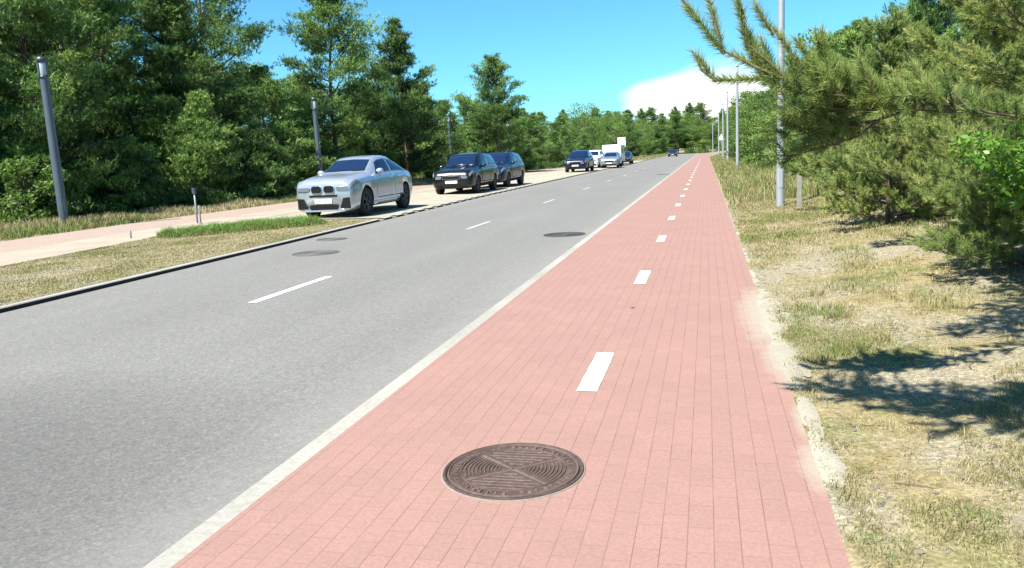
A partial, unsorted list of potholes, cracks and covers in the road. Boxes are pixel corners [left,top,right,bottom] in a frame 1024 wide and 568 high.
manhole cover [441,443,586,502]
